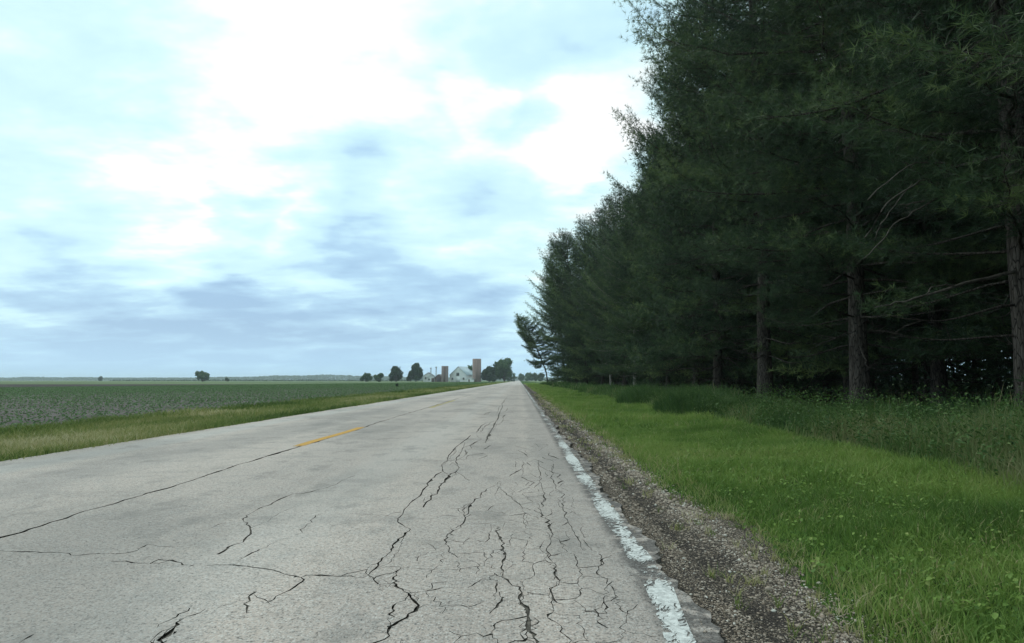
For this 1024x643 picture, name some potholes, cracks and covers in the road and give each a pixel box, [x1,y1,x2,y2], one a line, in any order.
crack [0,400,655,643]
